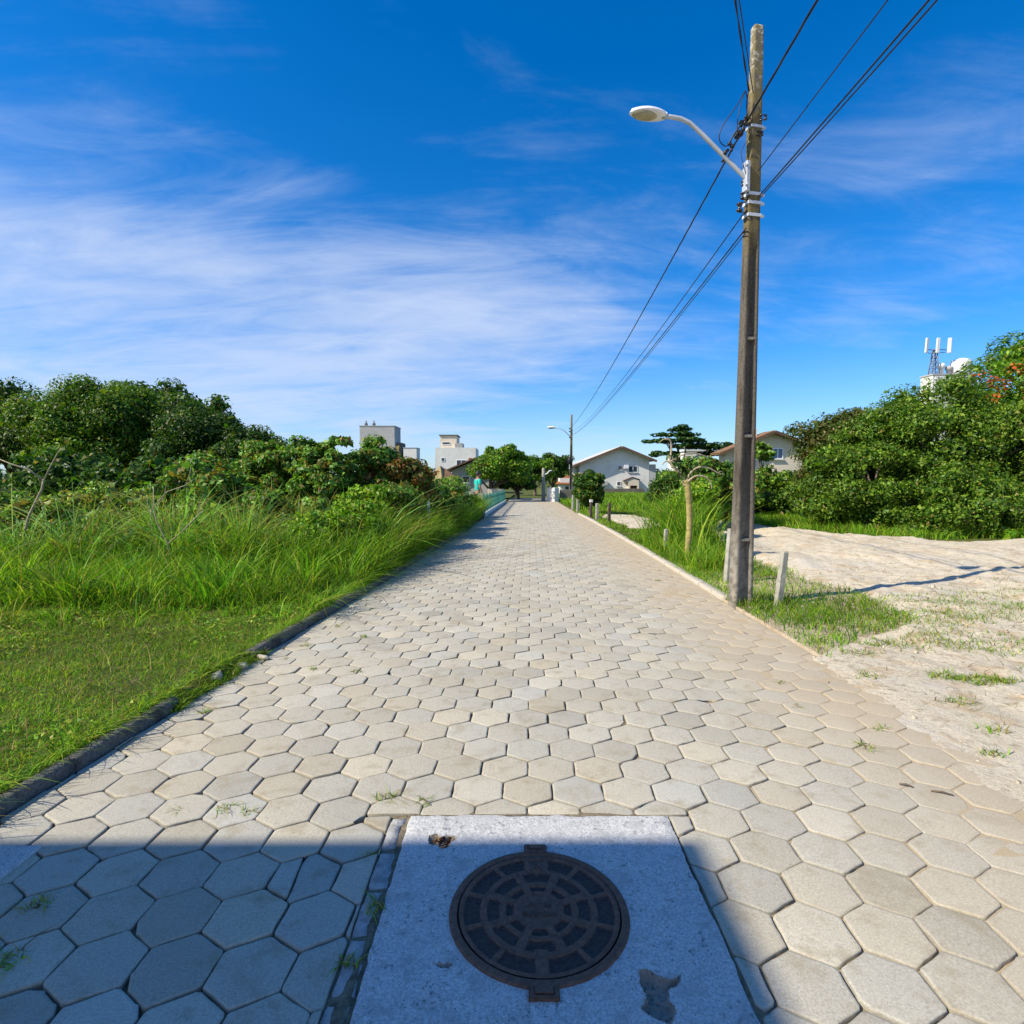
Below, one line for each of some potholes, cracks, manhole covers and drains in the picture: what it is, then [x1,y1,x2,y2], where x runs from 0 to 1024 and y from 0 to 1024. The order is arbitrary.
manhole cover [449,844,630,1003]
